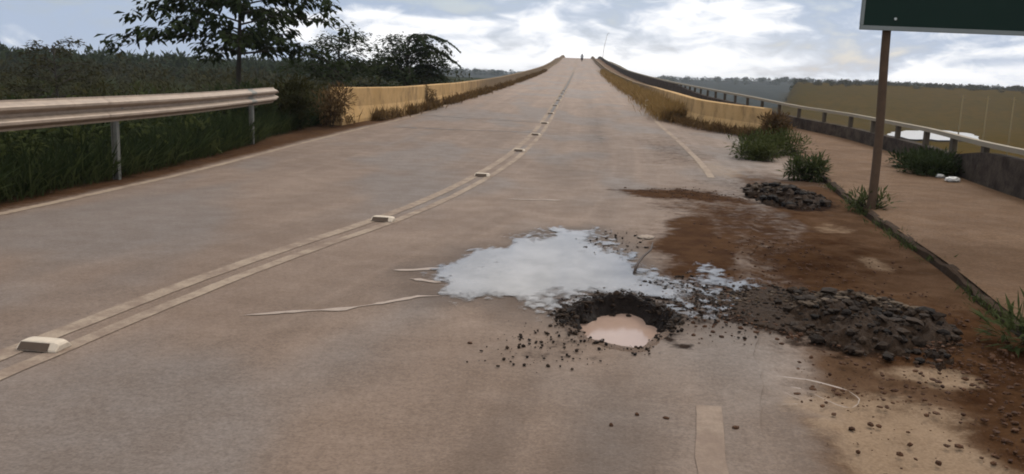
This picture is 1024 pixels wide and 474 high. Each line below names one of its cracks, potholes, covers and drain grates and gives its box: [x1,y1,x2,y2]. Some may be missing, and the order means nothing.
crack [248,267,440,315]
crack [780,376,860,408]
pothole [555,290,683,353]
